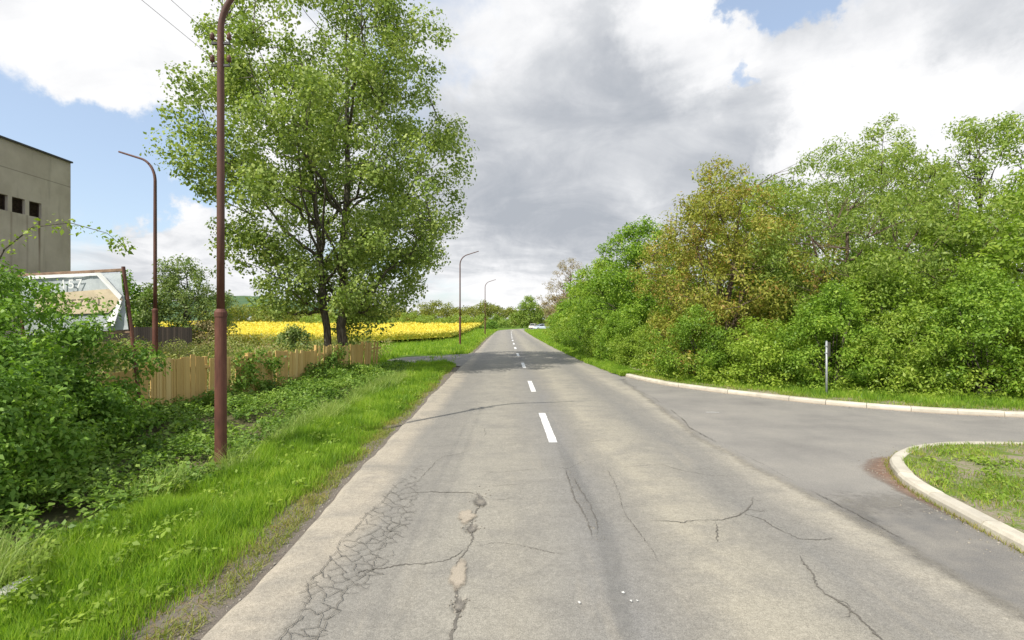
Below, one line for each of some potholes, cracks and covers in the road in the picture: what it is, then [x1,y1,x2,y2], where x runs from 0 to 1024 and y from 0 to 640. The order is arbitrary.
pothole [449,559,467,590]
pothole [458,510,477,524]
pothole [448,595,470,618]
crack [278,426,598,640]
crack [662,503,883,640]
